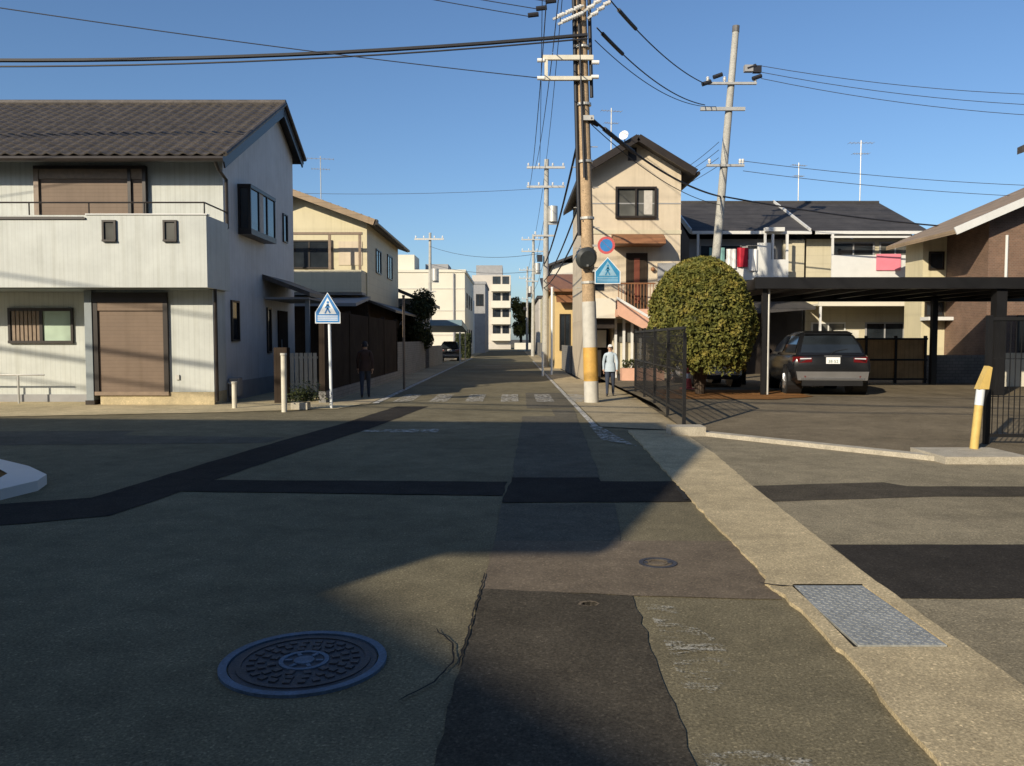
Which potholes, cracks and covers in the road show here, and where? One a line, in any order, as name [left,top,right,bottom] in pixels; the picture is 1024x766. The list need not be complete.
manhole cover [639,557,677,568]
manhole cover [217,631,387,699]
crack [398,628,455,701]
